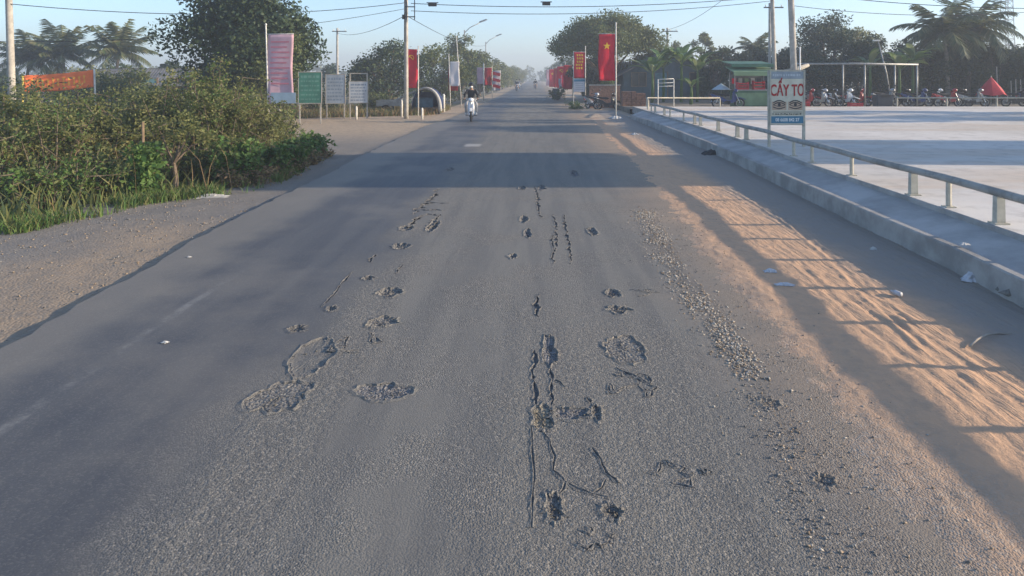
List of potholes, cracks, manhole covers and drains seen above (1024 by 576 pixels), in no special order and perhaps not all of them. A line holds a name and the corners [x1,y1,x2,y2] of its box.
pothole [282,335,341,380]
pothole [372,286,406,299]
pothole [602,288,625,298]
crack [528,349,566,408]
crack [527,425,620,528]
pothole [389,242,414,250]
pothole [593,500,630,524]
pothole [423,220,442,233]
crack [533,185,573,264]
pothole [599,334,650,366]
crack [320,254,378,307]
pothole [588,402,606,424]
